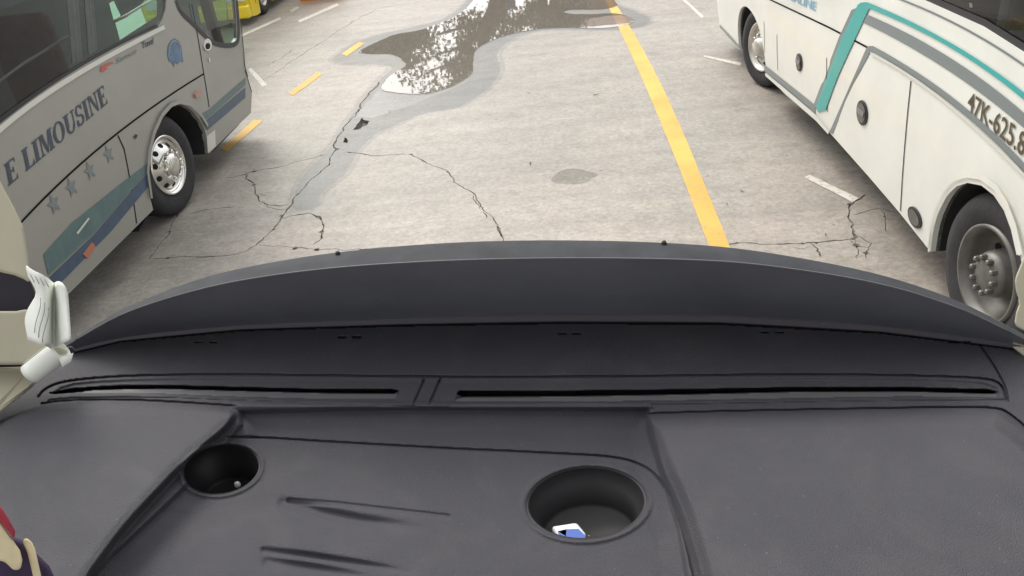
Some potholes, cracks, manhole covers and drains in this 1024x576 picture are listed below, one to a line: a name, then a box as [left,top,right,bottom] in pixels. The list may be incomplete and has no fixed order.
crack [149,82,504,259]
crack [729,194,892,260]
